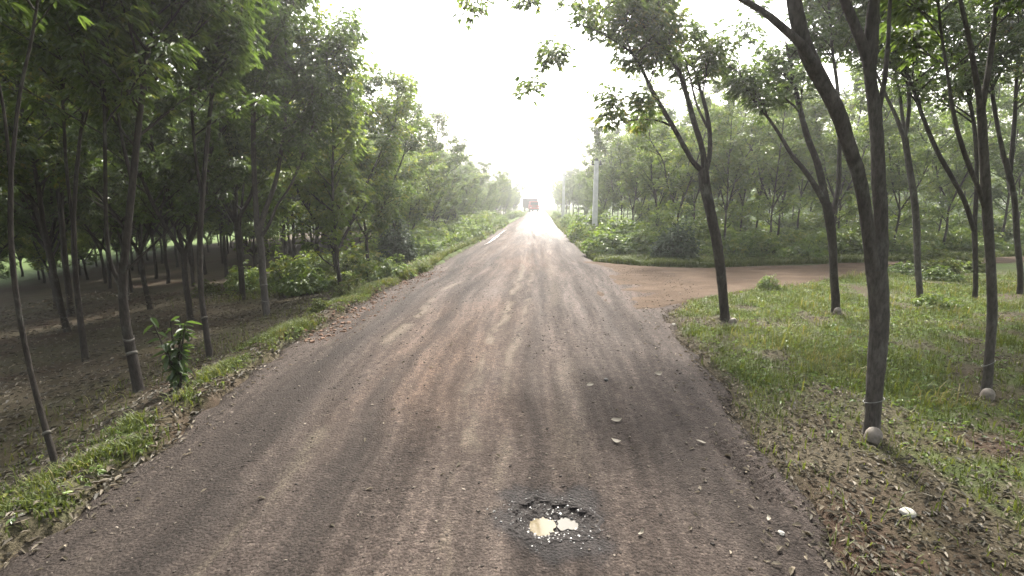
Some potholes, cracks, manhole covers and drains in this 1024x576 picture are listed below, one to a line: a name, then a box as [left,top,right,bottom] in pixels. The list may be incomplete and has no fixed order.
pothole [487,490,604,553]
